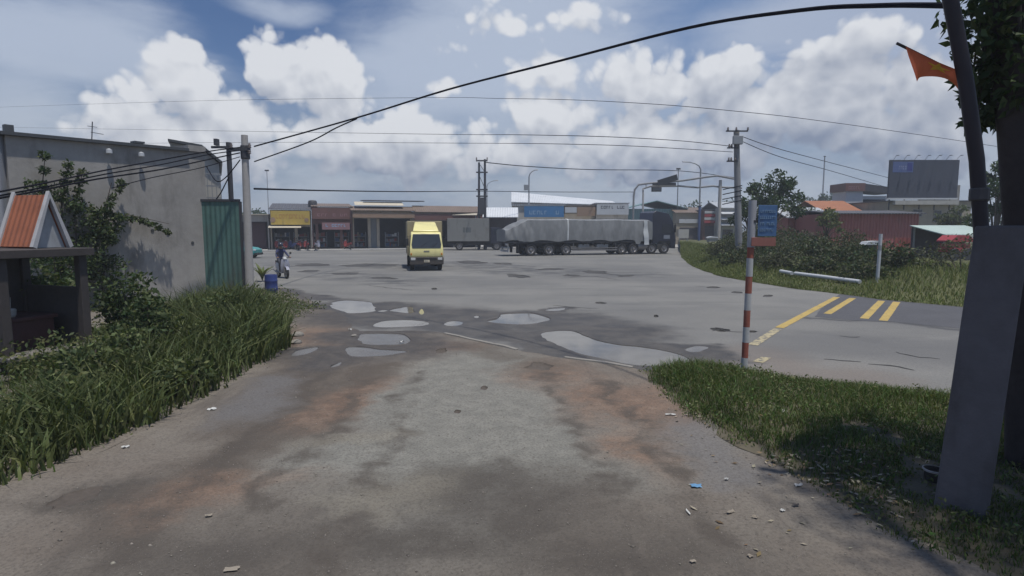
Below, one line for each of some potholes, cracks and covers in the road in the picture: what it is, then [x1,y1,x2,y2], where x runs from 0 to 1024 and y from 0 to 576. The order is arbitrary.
pothole [486,312,551,324]
pothole [540,330,690,366]
pothole [524,362,554,370]
pothole [330,300,376,313]
crack [830,352,937,370]
pothole [345,346,407,357]
pothole [356,333,411,345]
